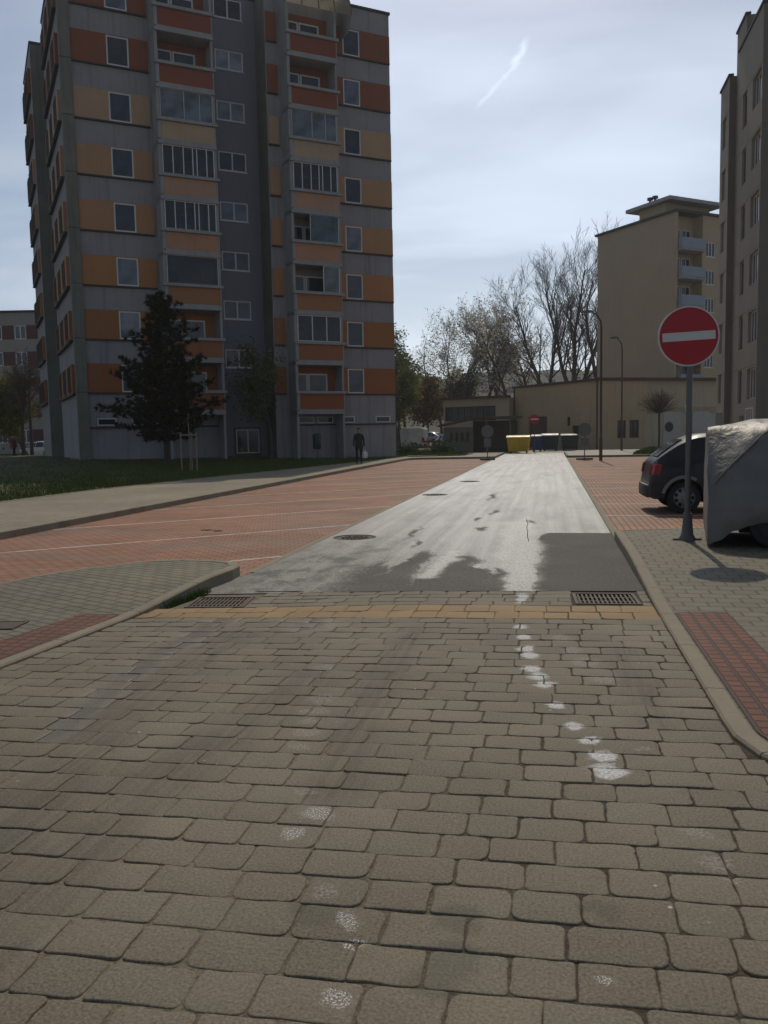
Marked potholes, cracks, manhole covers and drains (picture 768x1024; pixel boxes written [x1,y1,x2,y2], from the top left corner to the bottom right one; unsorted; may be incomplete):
utility cover [0,621,29,630]
drain grate [184,596,255,608]
drain grate [572,593,642,605]
